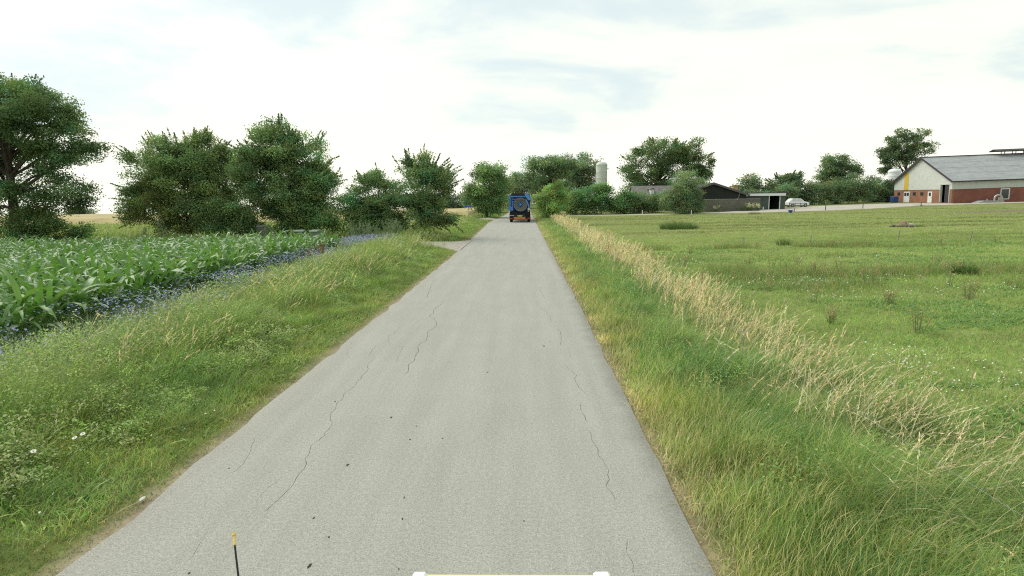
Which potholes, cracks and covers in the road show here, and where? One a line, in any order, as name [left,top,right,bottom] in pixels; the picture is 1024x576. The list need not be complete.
crack [541,287,615,499]
crack [257,281,441,513]
